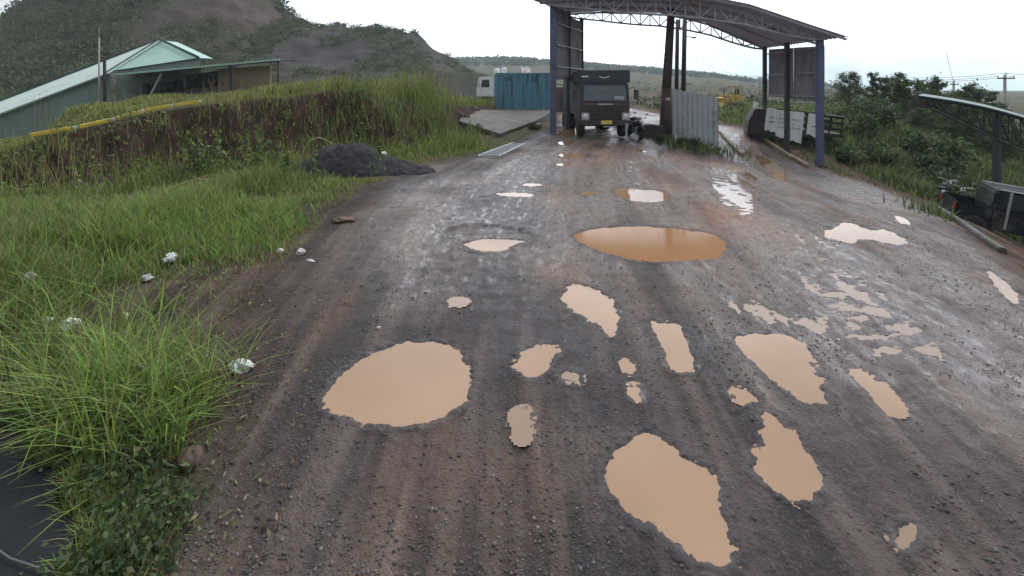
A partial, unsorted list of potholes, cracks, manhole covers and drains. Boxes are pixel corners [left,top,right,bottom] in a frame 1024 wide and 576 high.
pothole [440,222,539,255]
pothole [314,336,480,435]
pothole [590,425,749,576]
pothole [737,404,840,515]
pothole [554,279,626,341]
pothole [608,187,674,203]
pothole [506,339,571,383]
pothole [567,224,732,264]
pothole [643,317,704,377]
pothole [723,329,840,412]
